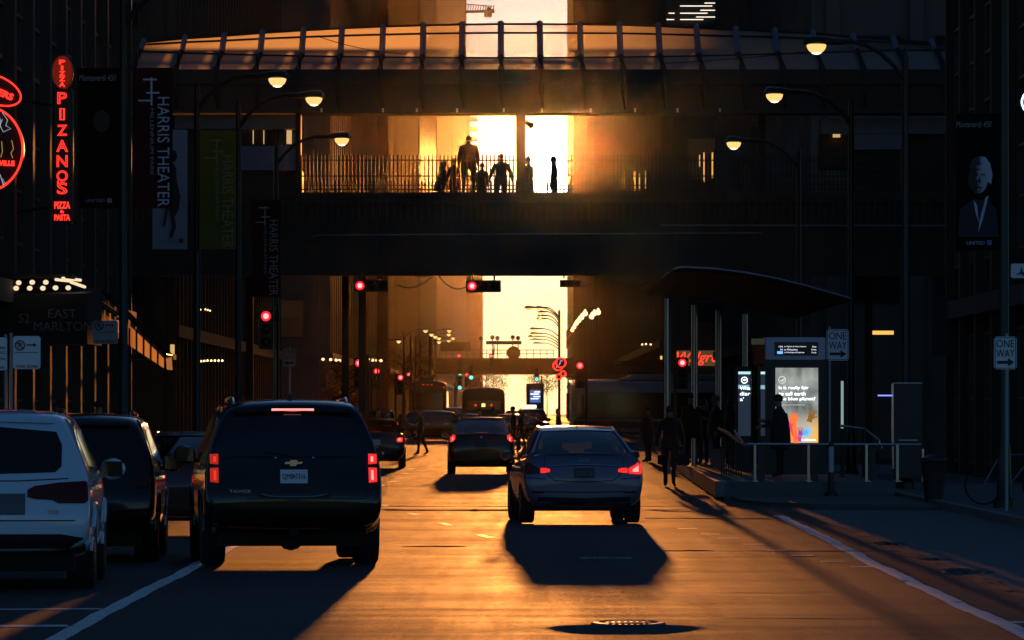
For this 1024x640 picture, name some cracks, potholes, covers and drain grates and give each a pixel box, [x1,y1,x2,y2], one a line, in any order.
manhole cover [591,619,666,627]
